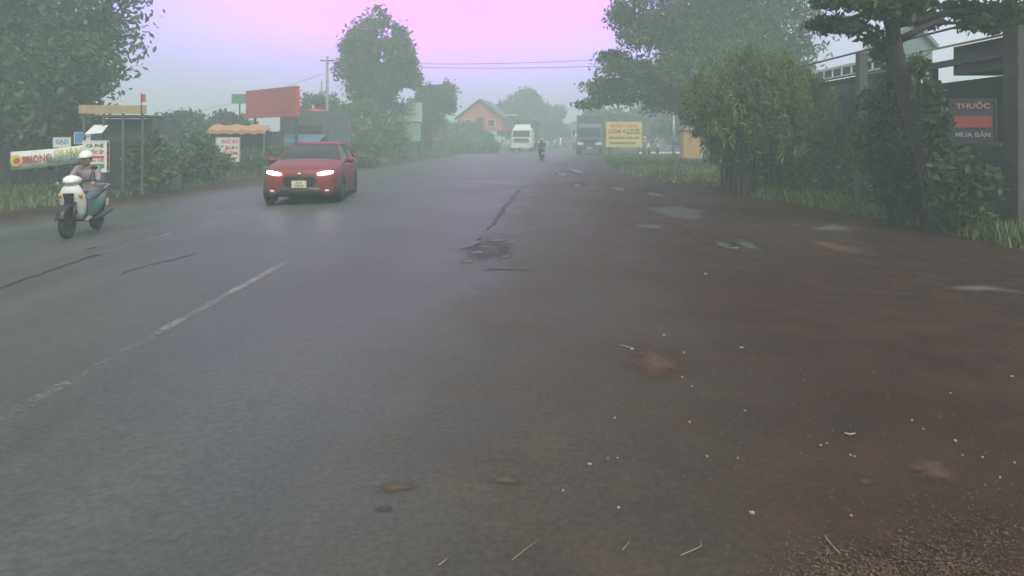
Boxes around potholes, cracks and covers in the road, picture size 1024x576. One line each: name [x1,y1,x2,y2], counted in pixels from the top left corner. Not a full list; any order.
pothole [730,235,770,253]
pothole [709,239,735,248]
crack [0,258,85,288]
pothole [462,238,516,269]
